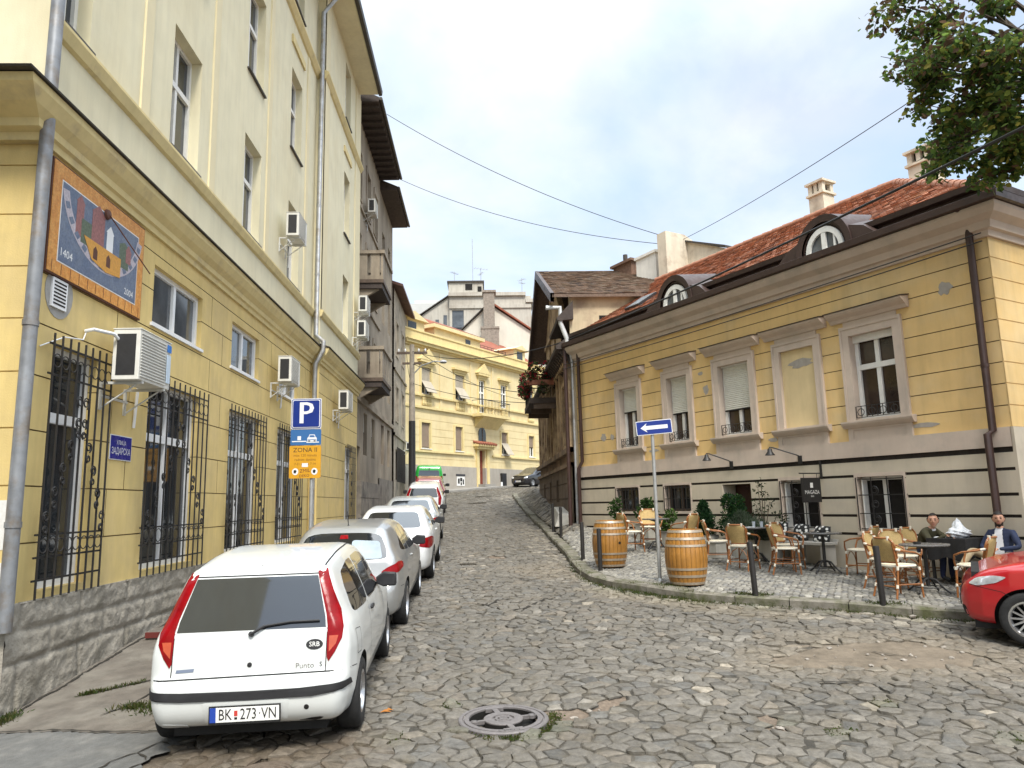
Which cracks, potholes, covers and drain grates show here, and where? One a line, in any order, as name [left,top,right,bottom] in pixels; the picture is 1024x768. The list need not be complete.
manhole cover [458,704,549,742]
